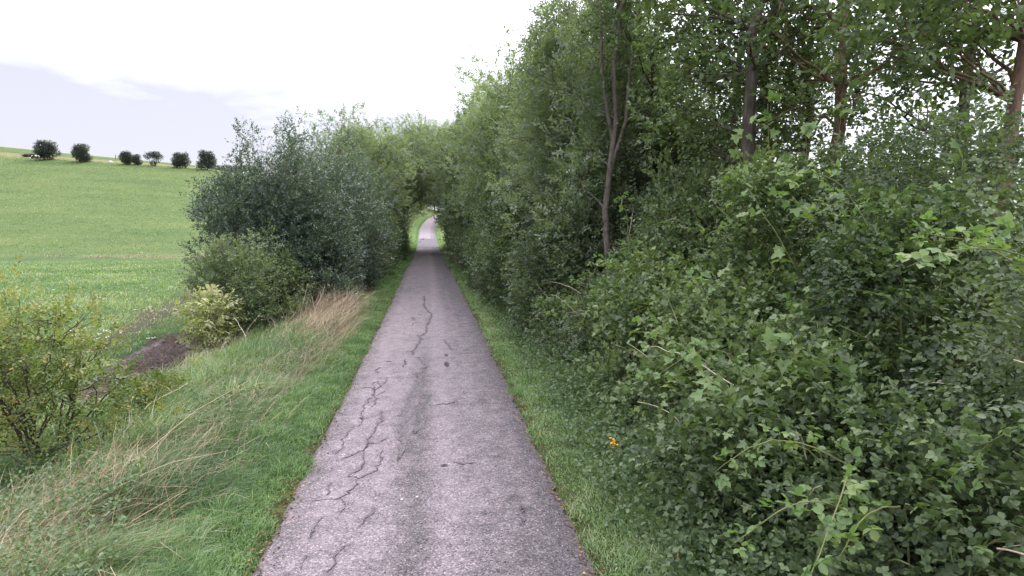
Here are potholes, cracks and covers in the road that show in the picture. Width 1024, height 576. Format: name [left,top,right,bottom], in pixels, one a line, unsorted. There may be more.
crack [312,296,455,525]
crack [310,517,345,572]
